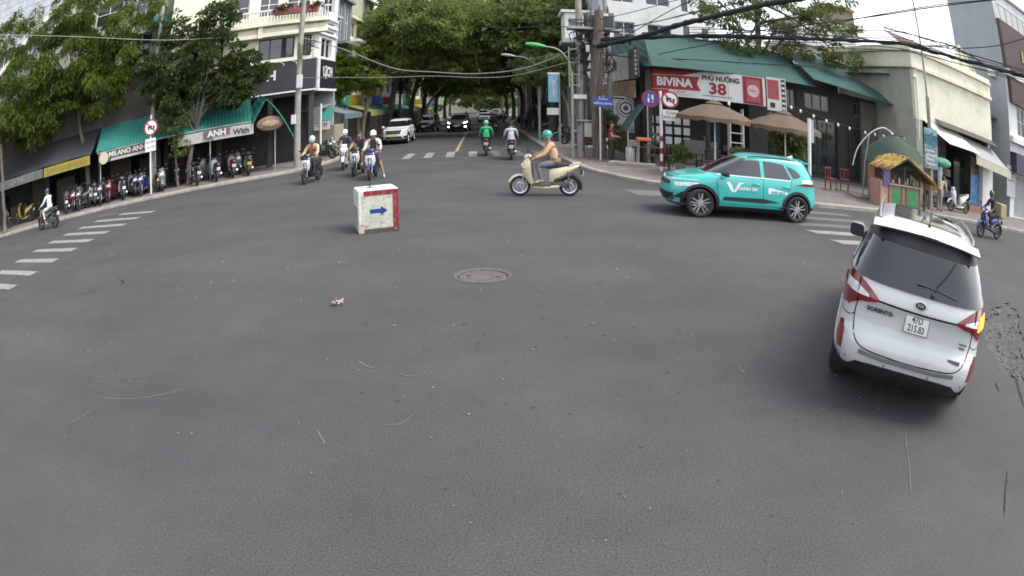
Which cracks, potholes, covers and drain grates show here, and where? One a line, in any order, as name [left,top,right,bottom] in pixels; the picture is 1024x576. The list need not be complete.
crack [994,371,1024,406]
pothole [983,302,1024,381]
manhole cover [453,268,512,283]
